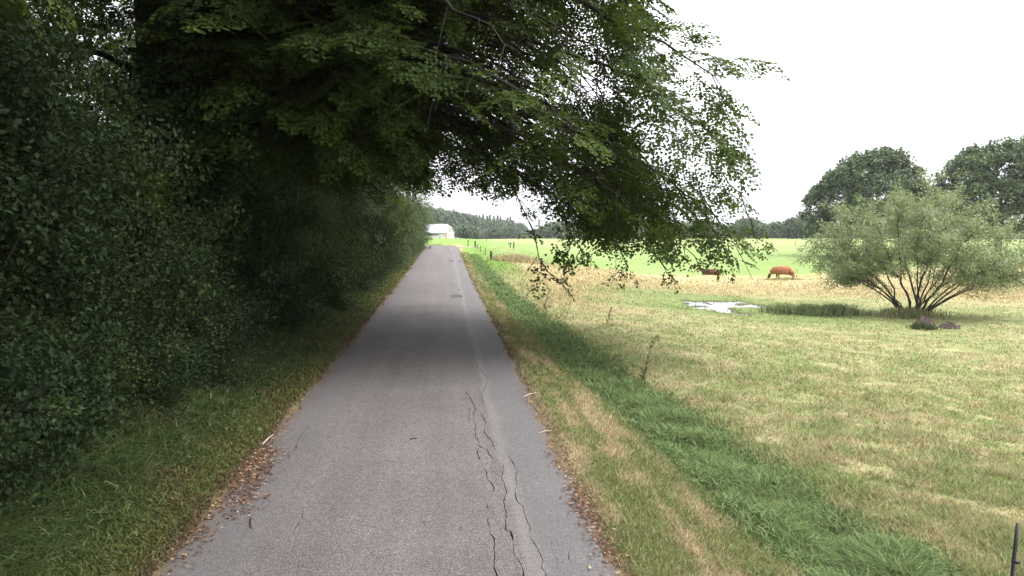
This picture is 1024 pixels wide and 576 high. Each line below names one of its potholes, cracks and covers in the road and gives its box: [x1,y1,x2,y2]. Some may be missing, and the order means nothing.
crack [465,365,575,576]
